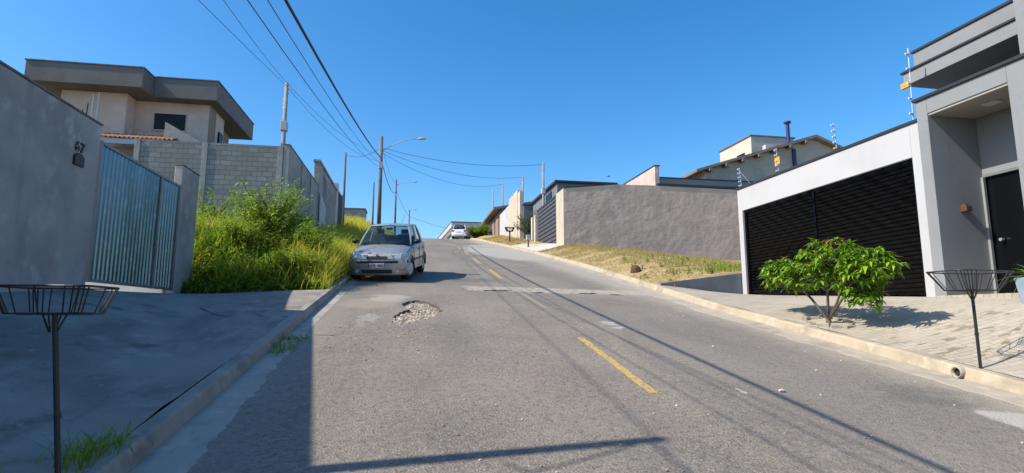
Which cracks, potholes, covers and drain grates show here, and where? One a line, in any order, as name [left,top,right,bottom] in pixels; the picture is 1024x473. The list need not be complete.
pothole [392,300,443,325]
